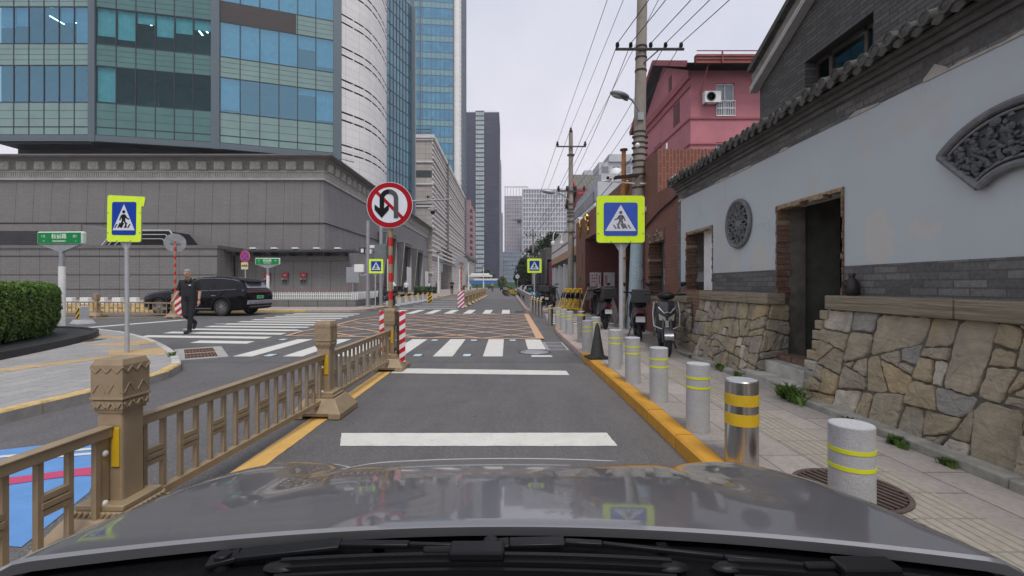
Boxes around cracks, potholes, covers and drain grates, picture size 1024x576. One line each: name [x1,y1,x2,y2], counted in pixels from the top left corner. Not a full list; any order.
manhole cover [792,468,916,514]
drain grate [543,342,569,350]
drain grate [174,346,229,361]
